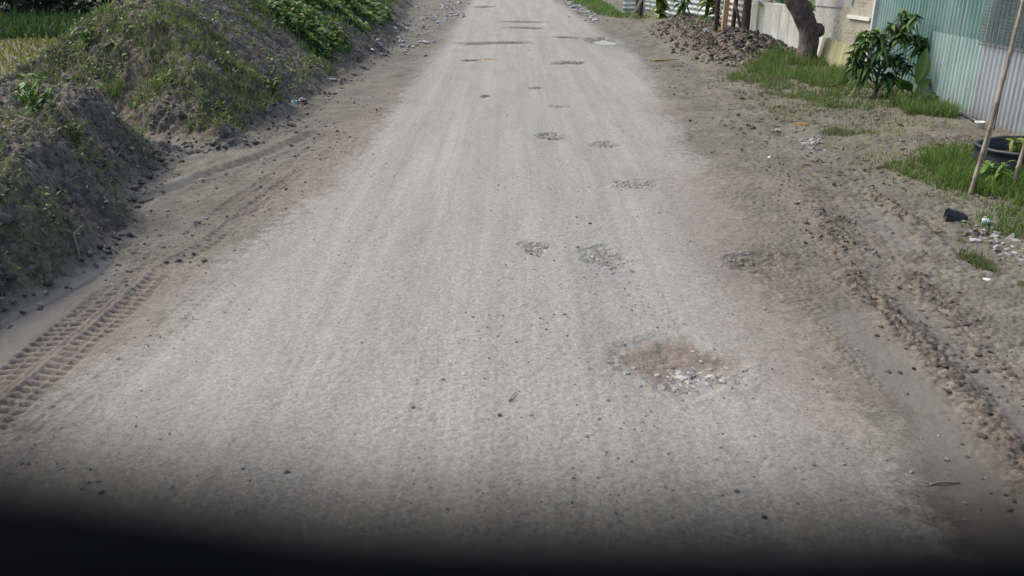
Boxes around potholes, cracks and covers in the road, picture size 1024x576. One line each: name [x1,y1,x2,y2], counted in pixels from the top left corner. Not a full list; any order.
pothole [612,180,672,190]
pothole [537,133,571,141]
pothole [584,37,624,46]
pothole [517,242,549,257]
pothole [579,245,633,271]
pothole [606,332,755,402]
pothole [722,251,792,273]
